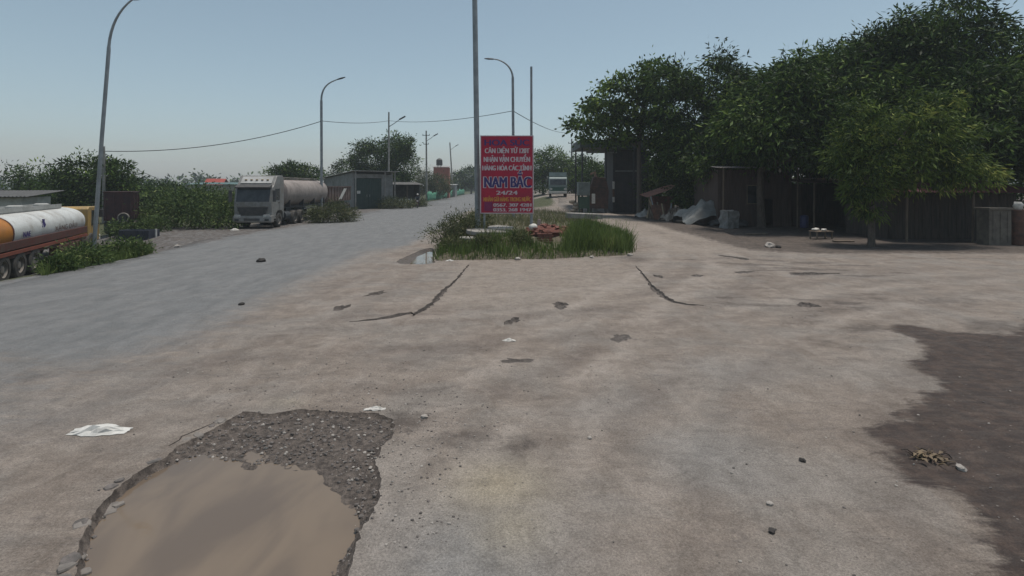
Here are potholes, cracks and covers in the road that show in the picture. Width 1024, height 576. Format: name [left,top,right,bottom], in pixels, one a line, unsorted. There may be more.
crack [636,266,704,306]
pothole [397,248,435,264]
crack [349,265,468,322]
pothole [610,334,632,343]
pothole [56,409,395,576]
